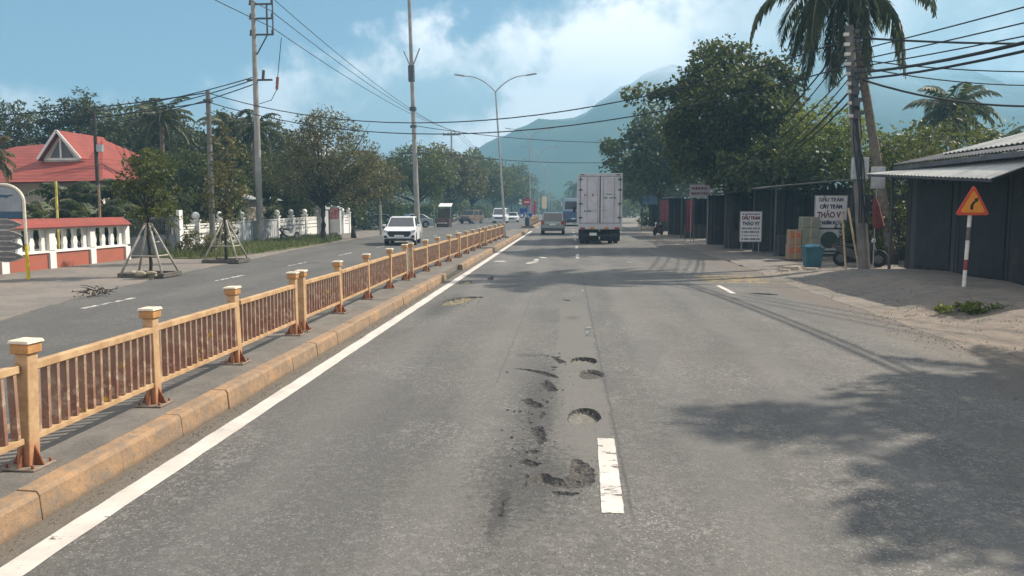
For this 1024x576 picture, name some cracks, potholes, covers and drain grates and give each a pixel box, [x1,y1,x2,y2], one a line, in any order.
pothole [530,458,597,489]
pothole [577,369,604,380]
pothole [567,408,601,424]
